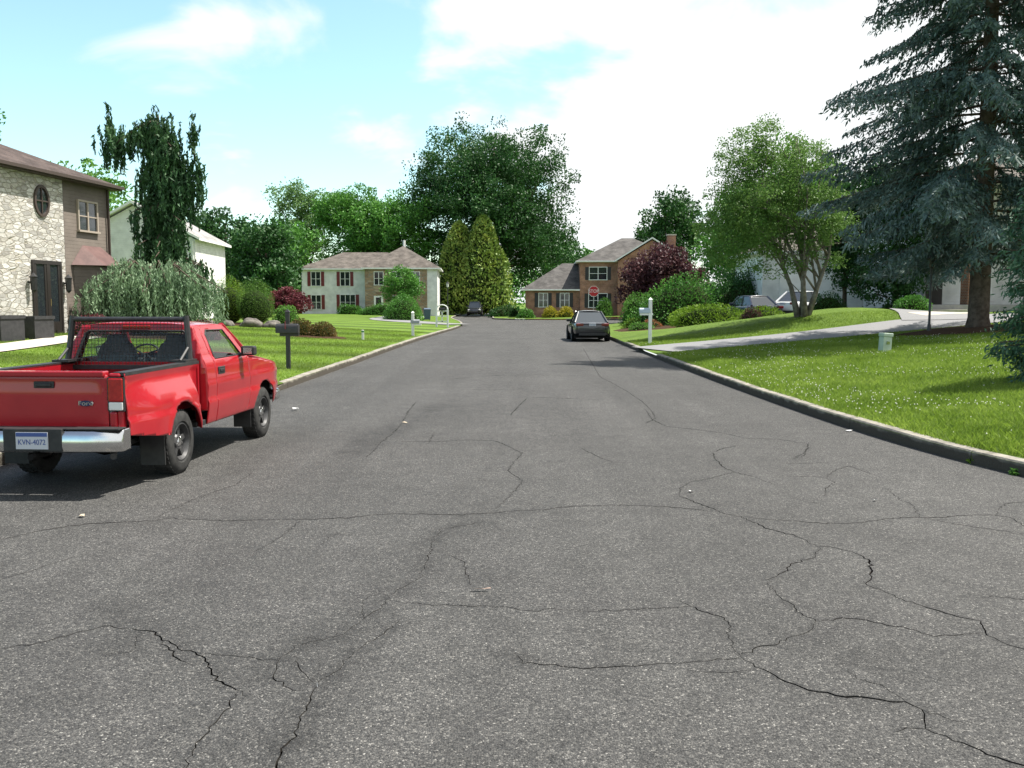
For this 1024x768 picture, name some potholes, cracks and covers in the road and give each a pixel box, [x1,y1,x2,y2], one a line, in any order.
crack [398,473,1024,766]
crack [788,443,875,503]
crack [586,353,794,484]
crack [419,435,522,509]
crack [2,476,704,768]
